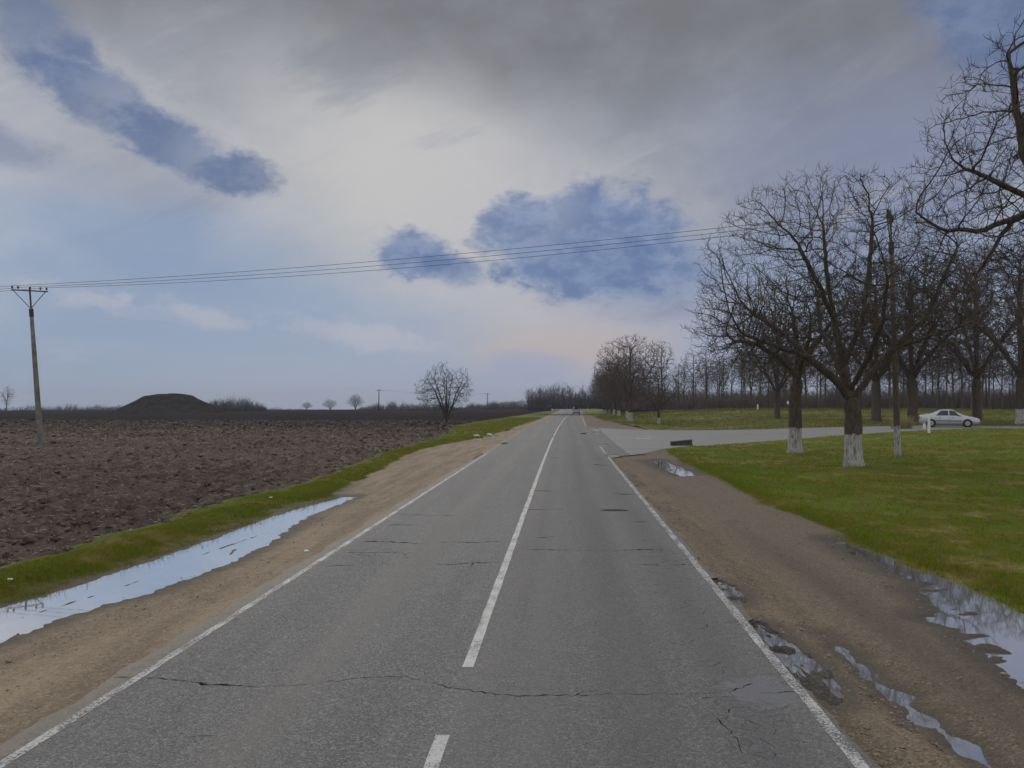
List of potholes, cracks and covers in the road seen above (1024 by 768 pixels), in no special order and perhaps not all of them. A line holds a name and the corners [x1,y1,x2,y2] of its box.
crack [145,537,807,760]
